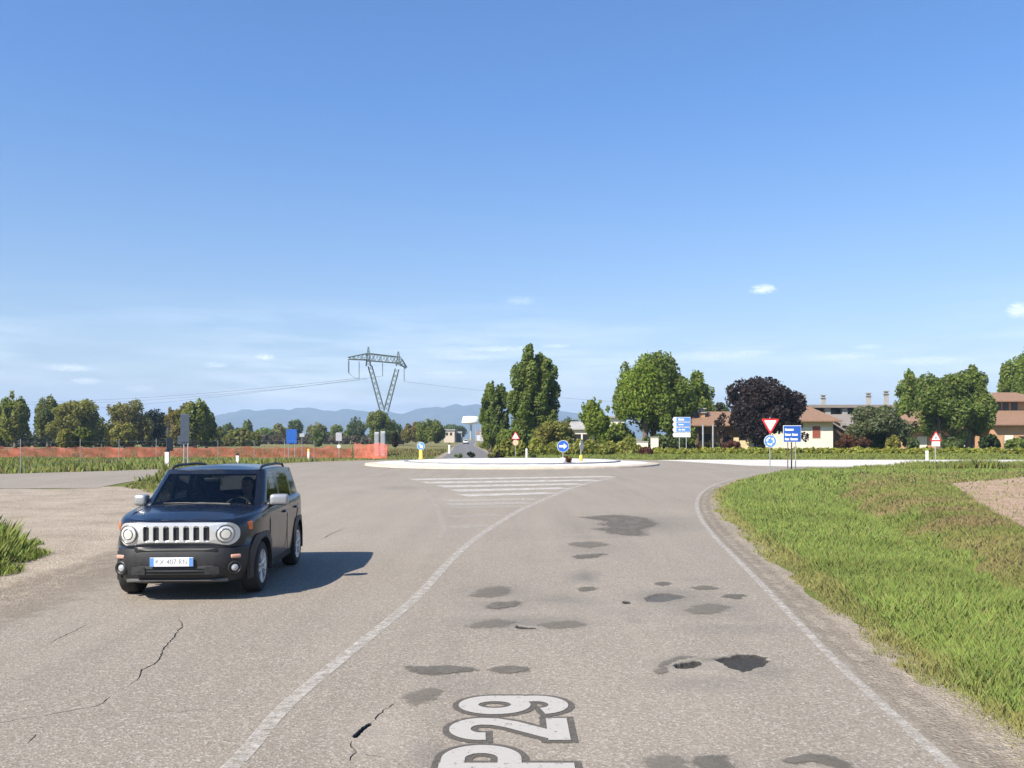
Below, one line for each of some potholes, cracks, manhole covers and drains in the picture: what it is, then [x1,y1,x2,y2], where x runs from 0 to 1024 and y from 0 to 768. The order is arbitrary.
crack [349,703,395,761]
pothole [673,660,703,669]
crack [1,618,184,743]
pothole [714,653,772,673]
